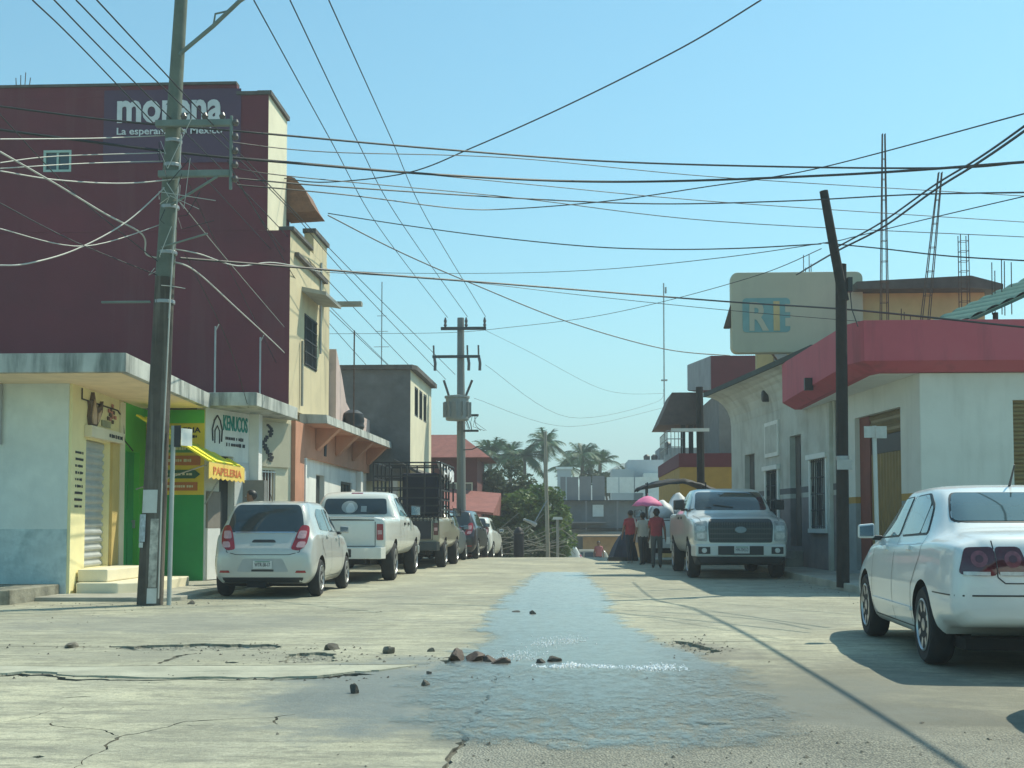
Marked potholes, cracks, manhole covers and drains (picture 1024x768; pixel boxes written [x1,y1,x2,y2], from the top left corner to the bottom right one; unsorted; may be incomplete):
crack [2,653,373,768]
pothole [674,641,720,654]
pothole [283,652,336,663]
